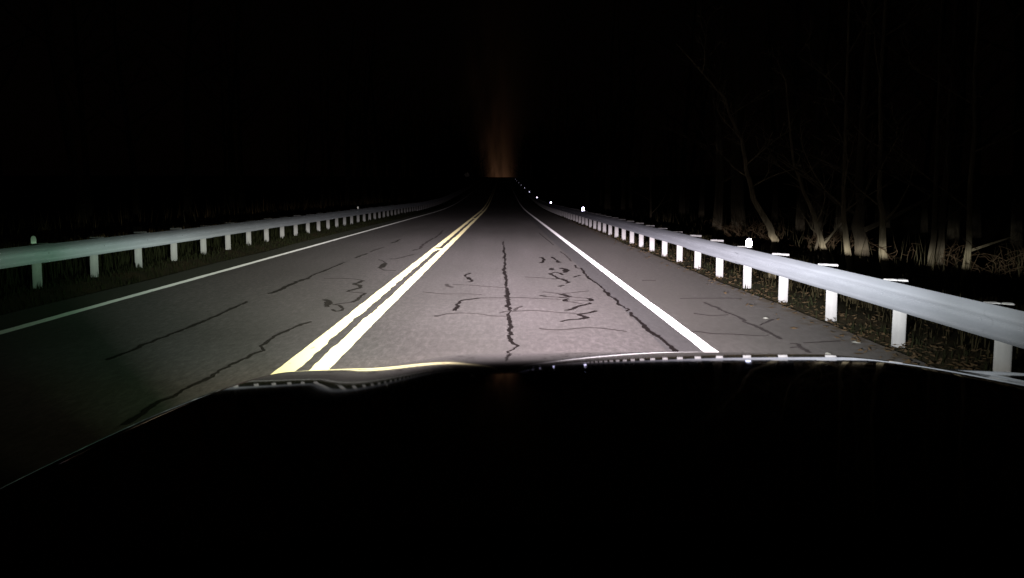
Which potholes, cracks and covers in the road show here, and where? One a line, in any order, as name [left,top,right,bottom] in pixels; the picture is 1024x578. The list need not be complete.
crack [426,233,840,353]
crack [106,231,443,425]
